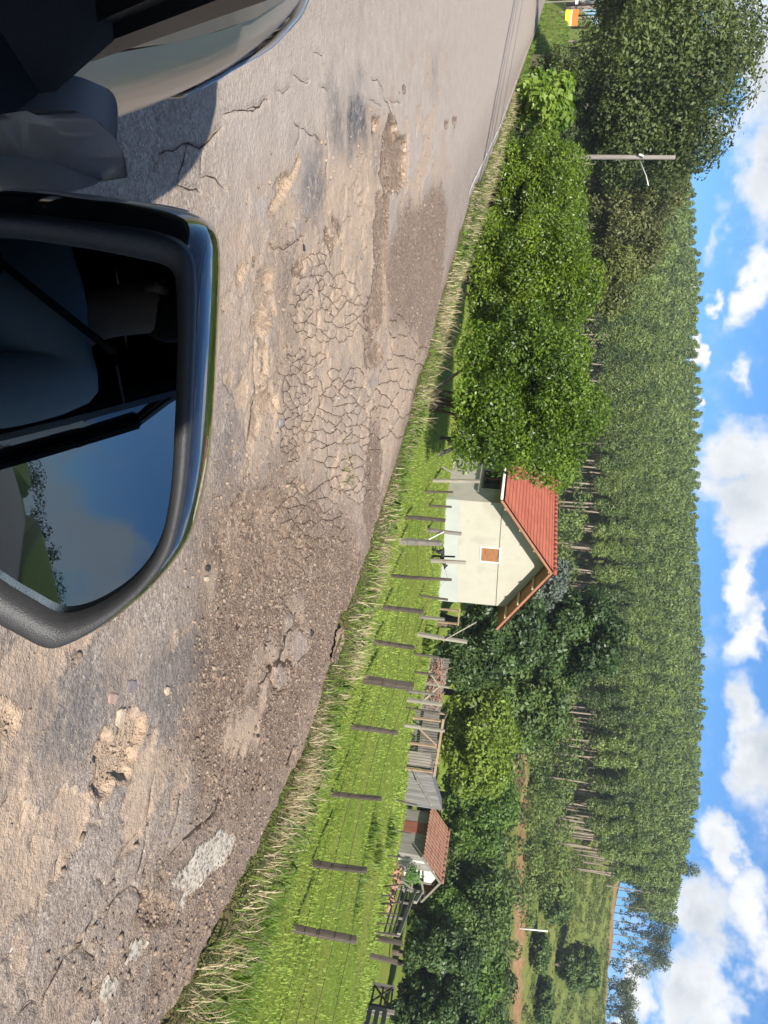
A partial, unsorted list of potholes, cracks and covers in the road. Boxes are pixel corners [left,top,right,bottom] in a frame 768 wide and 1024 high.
pothole [89,706,150,805]
pothole [268,153,302,218]
crack [152,74,328,193]
pothole [378,110,407,196]
crack [269,228,427,559]
pothole [371,113,380,137]
